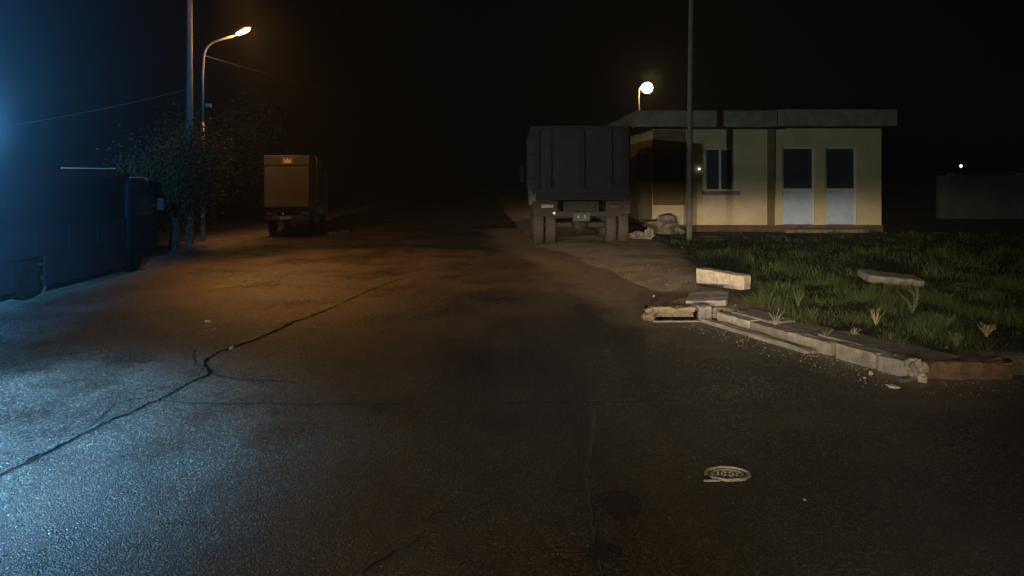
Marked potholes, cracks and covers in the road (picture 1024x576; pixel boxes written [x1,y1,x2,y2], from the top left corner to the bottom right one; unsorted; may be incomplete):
manhole cover [701,466,754,484]
crack [0,276,680,476]
crack [362,539,421,575]
